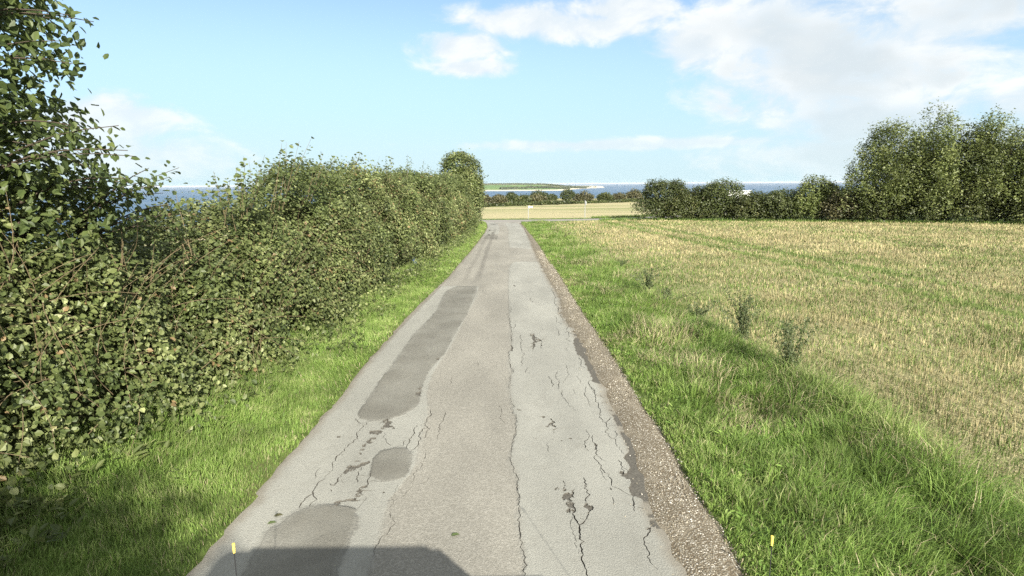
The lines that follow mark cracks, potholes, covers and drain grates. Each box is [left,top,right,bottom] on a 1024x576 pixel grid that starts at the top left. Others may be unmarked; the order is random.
crack [299,411,446,554]
crack [551,290,644,576]
